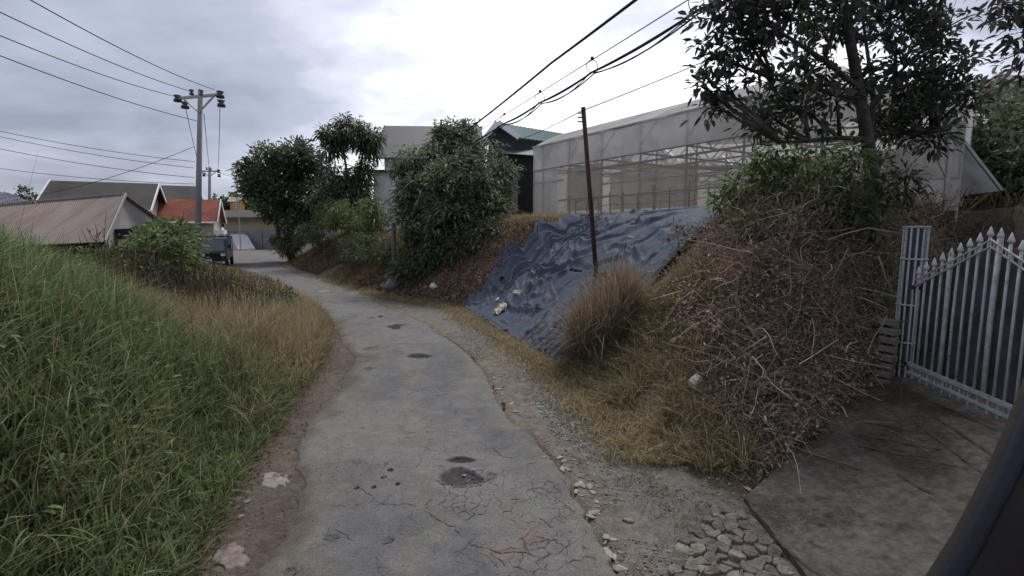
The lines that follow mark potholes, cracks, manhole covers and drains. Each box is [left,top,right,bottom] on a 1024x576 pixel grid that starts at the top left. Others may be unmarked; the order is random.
crack [324,411,596,573]
pothole [436,466,488,488]
